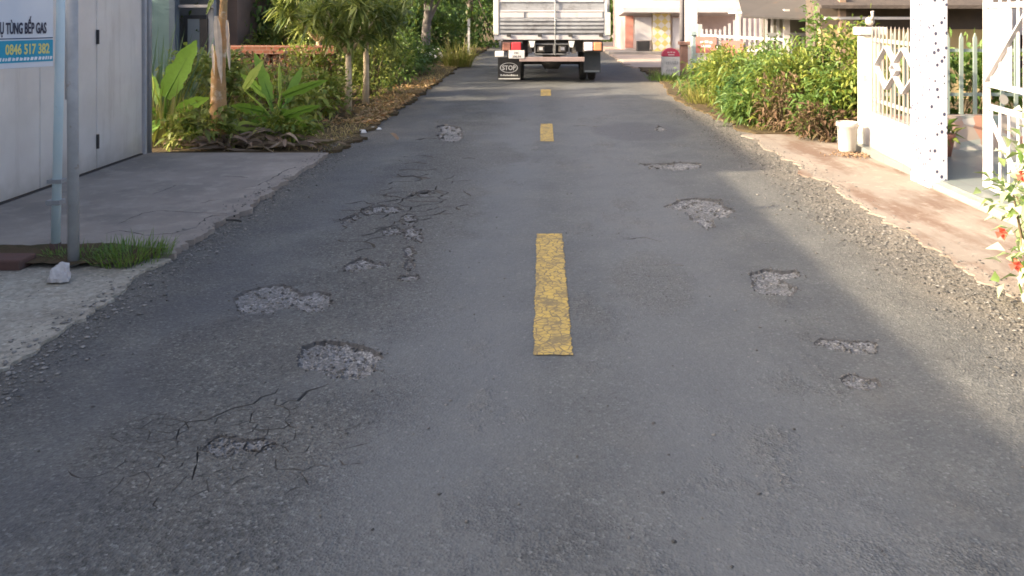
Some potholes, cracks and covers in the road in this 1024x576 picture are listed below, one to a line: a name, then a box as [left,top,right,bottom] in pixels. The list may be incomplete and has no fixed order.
pothole [225,281,344,319]
pothole [638,161,702,171]
pothole [838,372,882,391]
pothole [435,121,464,142]
pothole [748,267,807,300]
crack [68,384,370,508]
pothole [663,196,736,230]
pothole [197,431,287,460]
pothole [285,339,389,384]
crack [333,138,471,252]
pothole [810,336,879,356]
